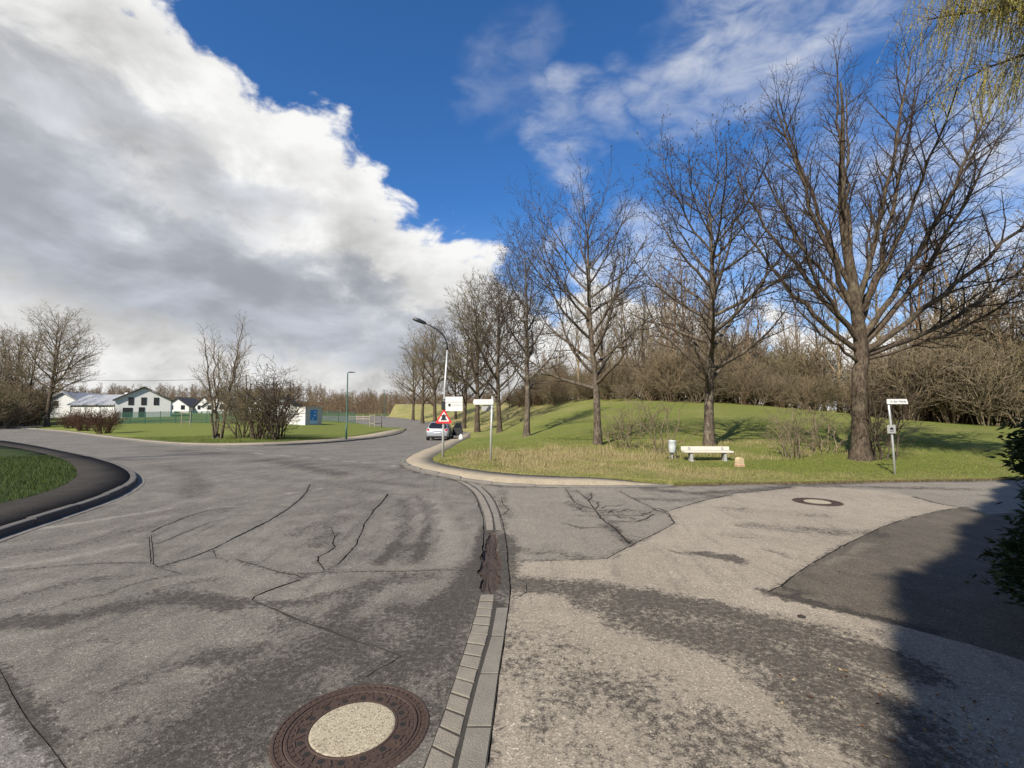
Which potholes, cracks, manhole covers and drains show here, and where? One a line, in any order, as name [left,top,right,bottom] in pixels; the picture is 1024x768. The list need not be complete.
manhole cover [792,498,844,506]
pothole [477,532,502,594]
crack [213,494,401,681]
manhole cover [268,684,430,768]
crack [566,490,653,544]
